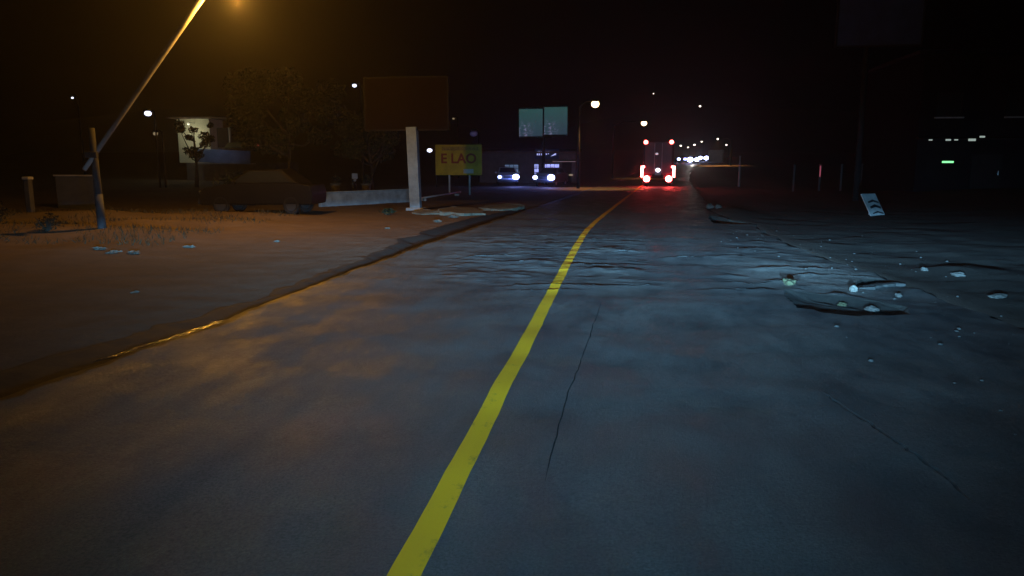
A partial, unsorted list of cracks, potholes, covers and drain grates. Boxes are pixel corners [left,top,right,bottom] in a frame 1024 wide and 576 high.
pothole [783,289,910,316]
crack [545,304,601,480]
pothole [855,279,887,287]
crack [823,392,978,505]
pothole [709,216,746,224]
